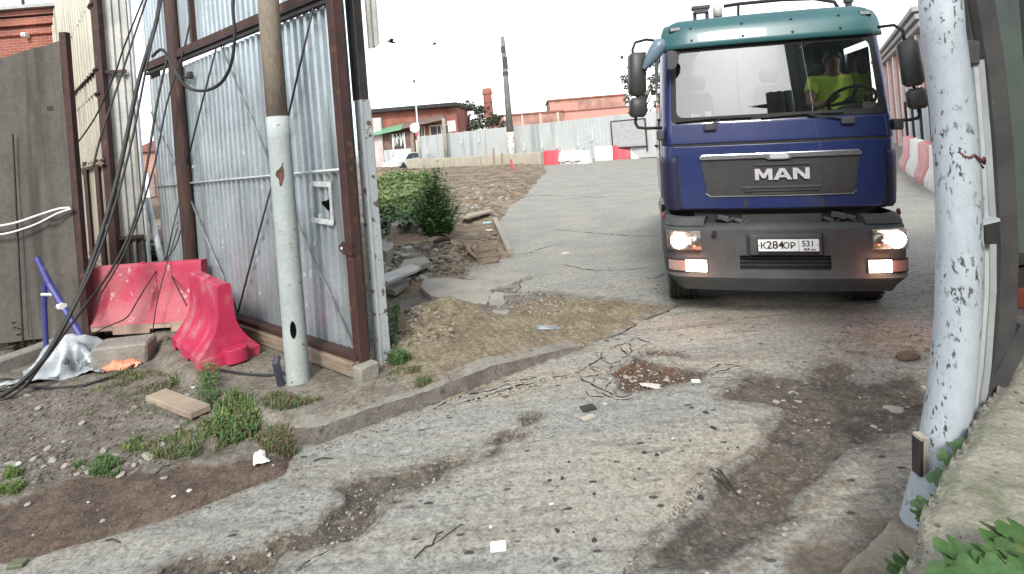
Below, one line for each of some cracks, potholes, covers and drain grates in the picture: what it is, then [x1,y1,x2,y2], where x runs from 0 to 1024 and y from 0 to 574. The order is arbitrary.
crack [434,304,680,410]
pothole [606,355,712,395]
pothole [484,429,532,448]
pothole [515,412,547,429]
pothole [149,455,474,574]
crack [511,229,666,279]
pothole [622,360,927,574]
